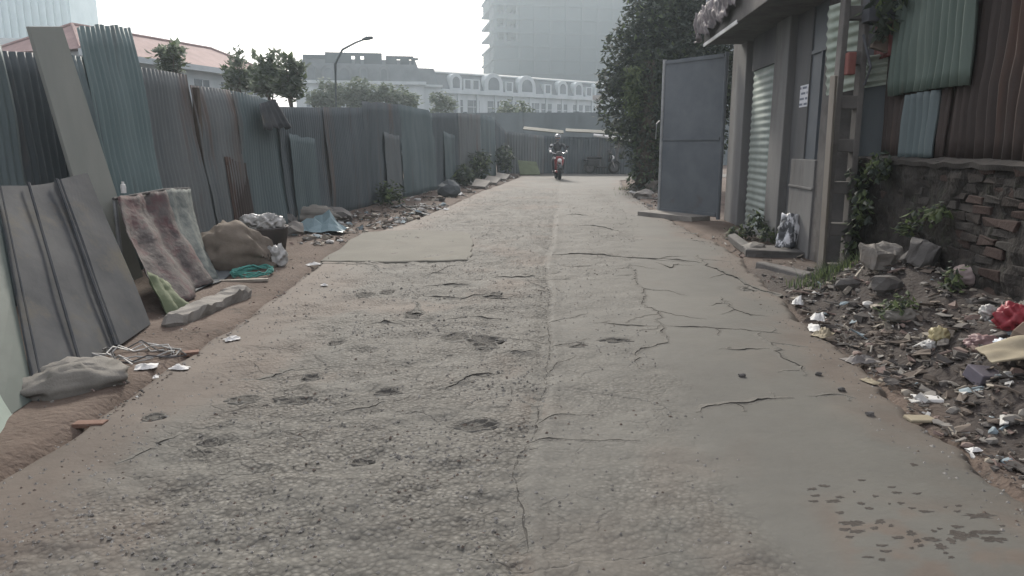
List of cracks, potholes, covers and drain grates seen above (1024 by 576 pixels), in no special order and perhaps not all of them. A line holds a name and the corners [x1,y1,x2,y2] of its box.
pothole [299,373,321,382]
pothole [349,457,376,467]
pothole [446,418,501,433]
pothole [402,309,426,319]
pothole [462,334,507,349]
pothole [470,341,495,352]
crack [320,227,857,413]
pothole [142,412,167,422]
pothole [373,387,402,396]
